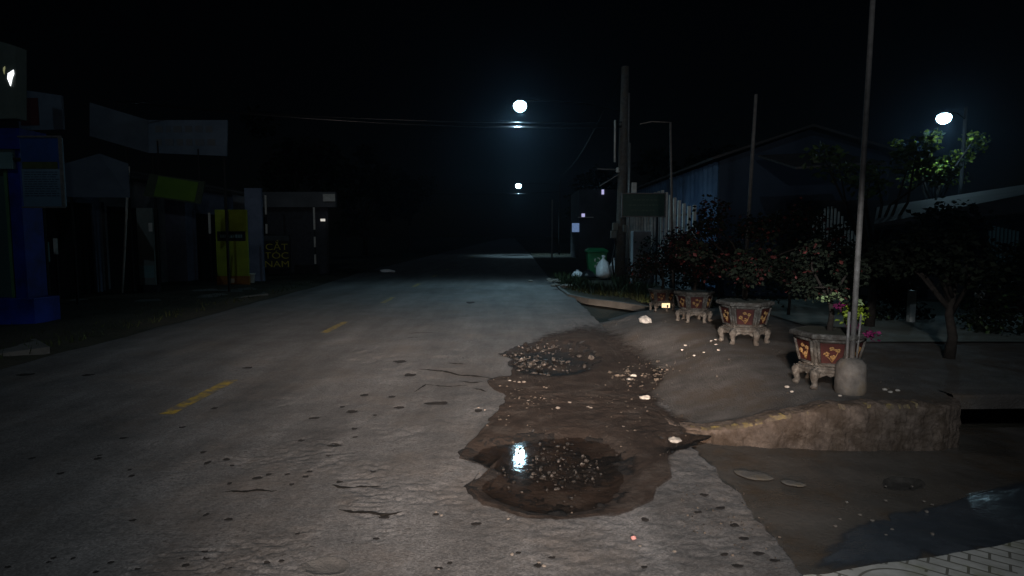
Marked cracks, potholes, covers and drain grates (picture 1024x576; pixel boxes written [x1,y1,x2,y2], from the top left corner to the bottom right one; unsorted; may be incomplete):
pothole [458,432,636,519]
crack [416,363,492,392]
pothole [499,340,602,376]
